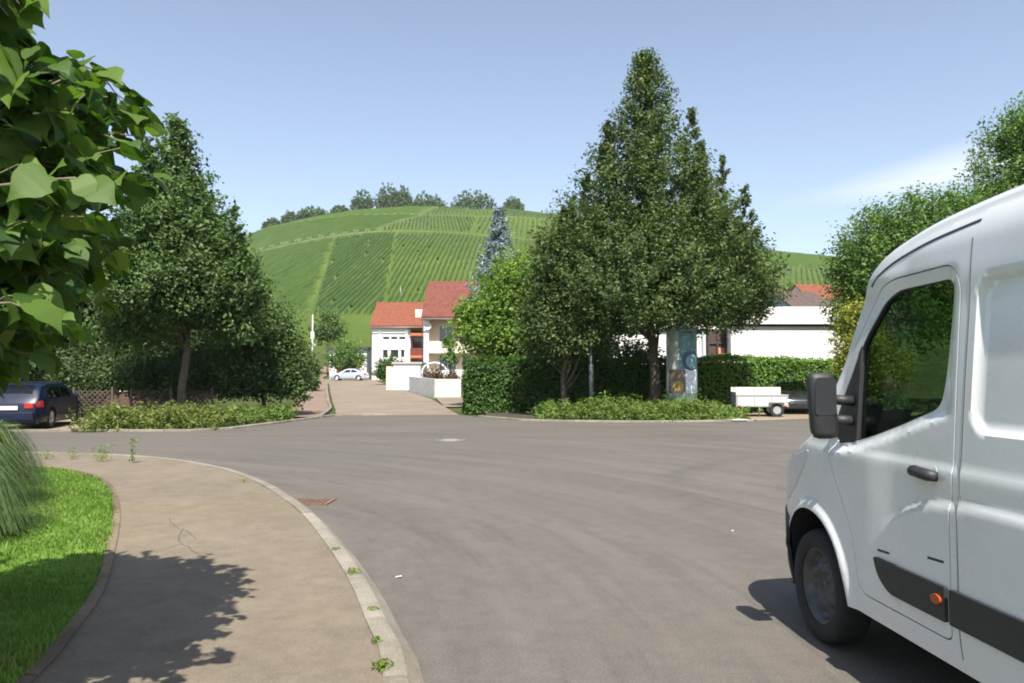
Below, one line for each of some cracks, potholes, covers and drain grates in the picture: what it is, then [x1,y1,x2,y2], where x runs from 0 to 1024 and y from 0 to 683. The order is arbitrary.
drain grate [294,498,337,506]
crack [169,518,196,553]
